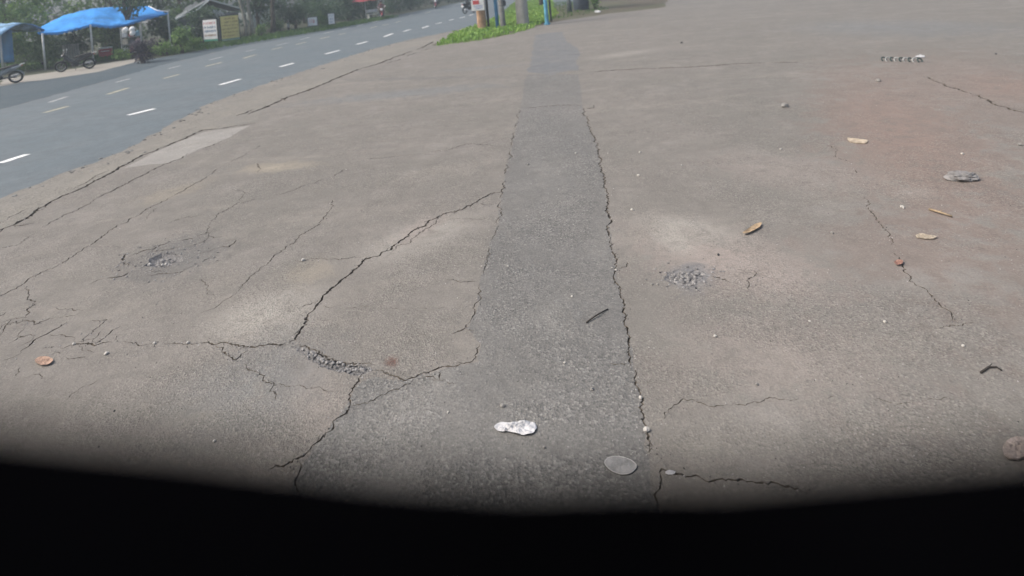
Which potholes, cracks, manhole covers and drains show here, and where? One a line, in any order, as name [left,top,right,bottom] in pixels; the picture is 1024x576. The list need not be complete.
crack [0,42,433,248]
crack [0,146,261,397]
crack [659,396,953,421]
pothole [645,262,731,296]
crack [65,192,500,452]
pothole [94,224,236,284]
crack [829,145,978,328]
crack [924,76,1021,112]
